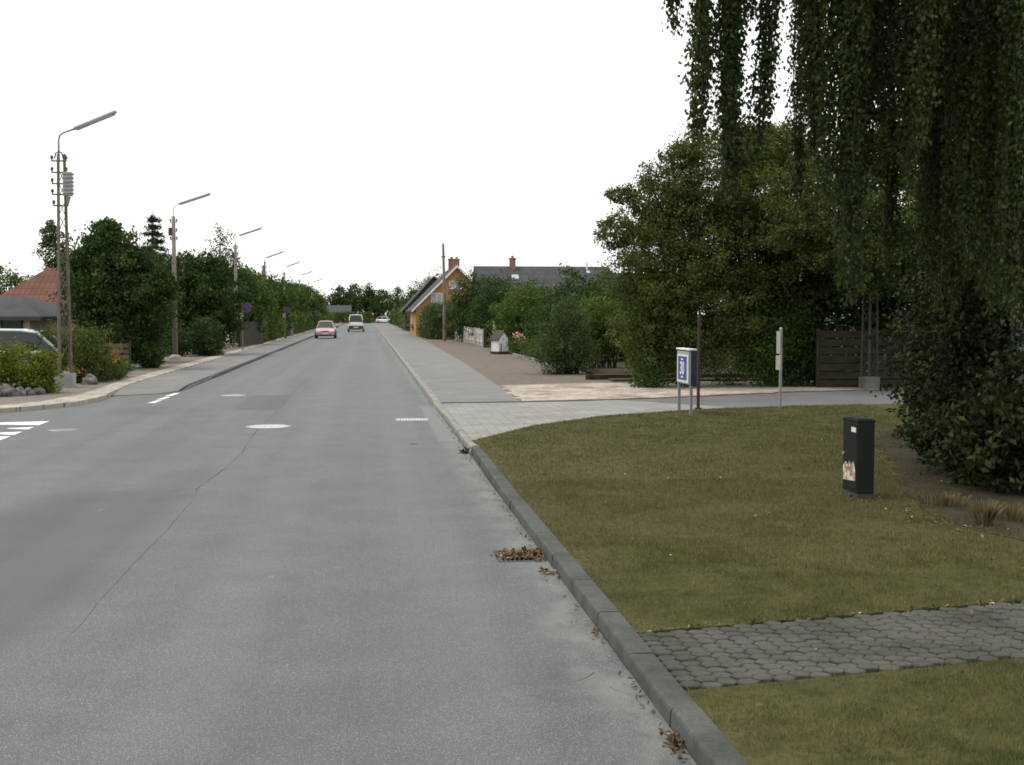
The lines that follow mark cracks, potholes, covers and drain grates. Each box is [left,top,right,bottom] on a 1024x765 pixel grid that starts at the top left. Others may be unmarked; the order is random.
drain grate [493,549,547,562]
crack [66,369,315,640]
